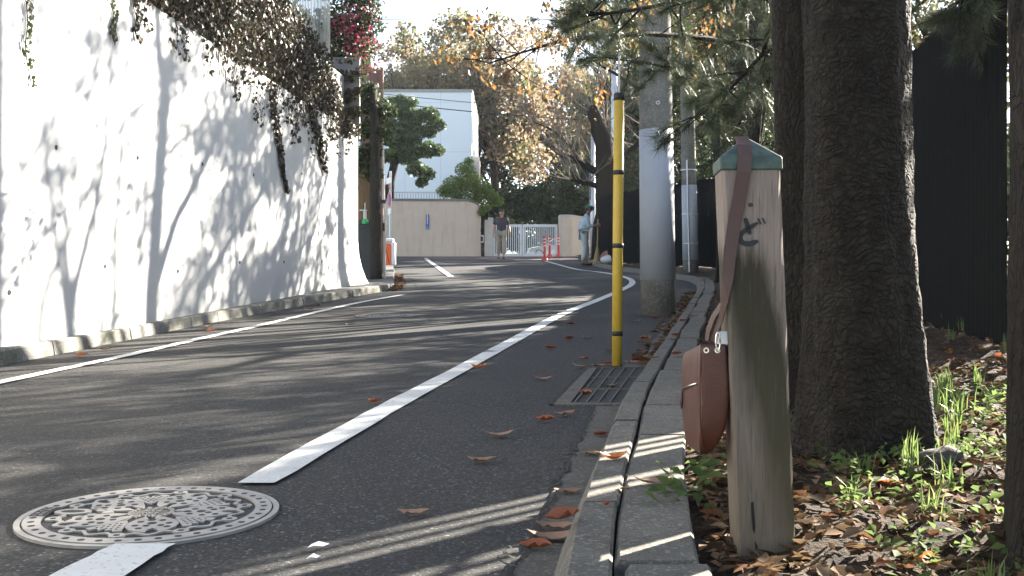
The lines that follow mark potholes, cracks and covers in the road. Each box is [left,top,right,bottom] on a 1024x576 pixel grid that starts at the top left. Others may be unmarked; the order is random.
manhole cover [13,486,279,549]
drain grate [554,368,644,407]
